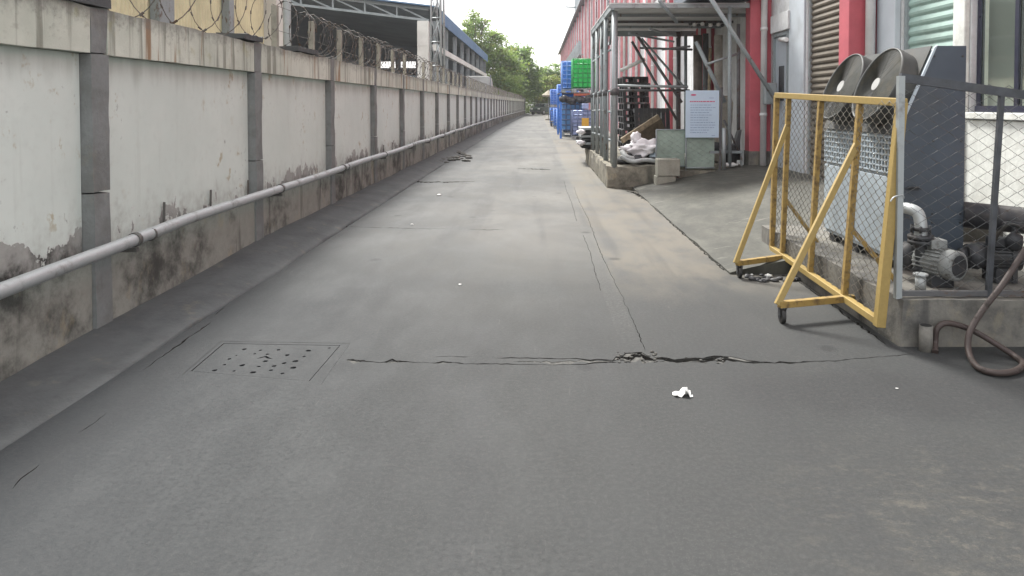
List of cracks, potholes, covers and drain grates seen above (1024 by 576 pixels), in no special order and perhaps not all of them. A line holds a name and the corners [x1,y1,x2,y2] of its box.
manhole cover [184,341,350,385]
crack [347,182,908,365]
